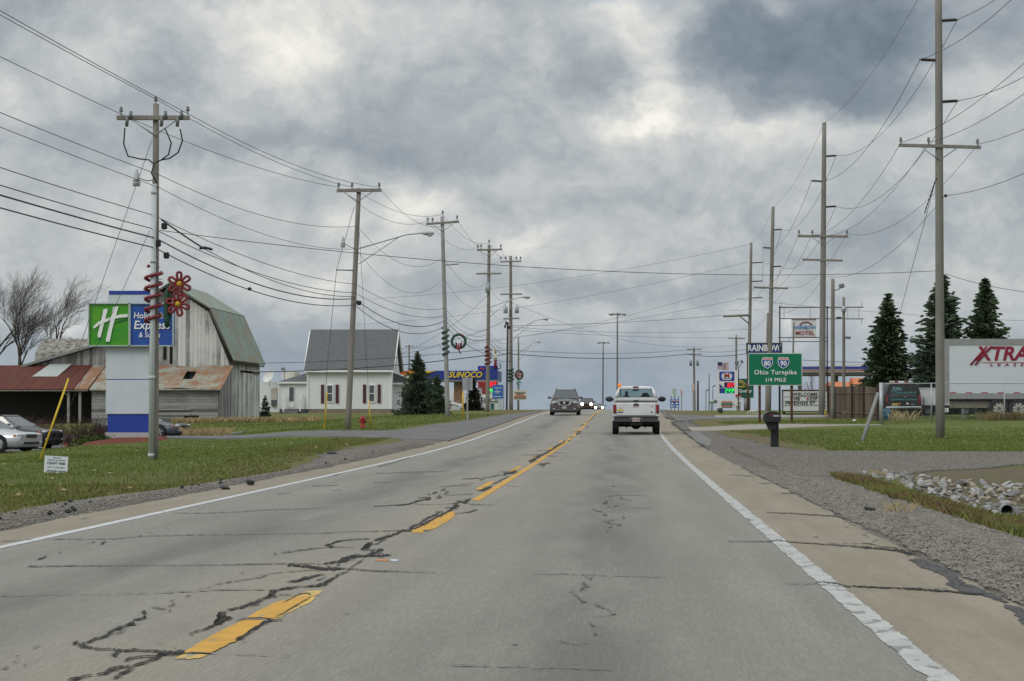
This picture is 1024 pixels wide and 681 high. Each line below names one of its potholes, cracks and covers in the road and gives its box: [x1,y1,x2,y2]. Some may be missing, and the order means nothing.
crack [3,450,660,680]
